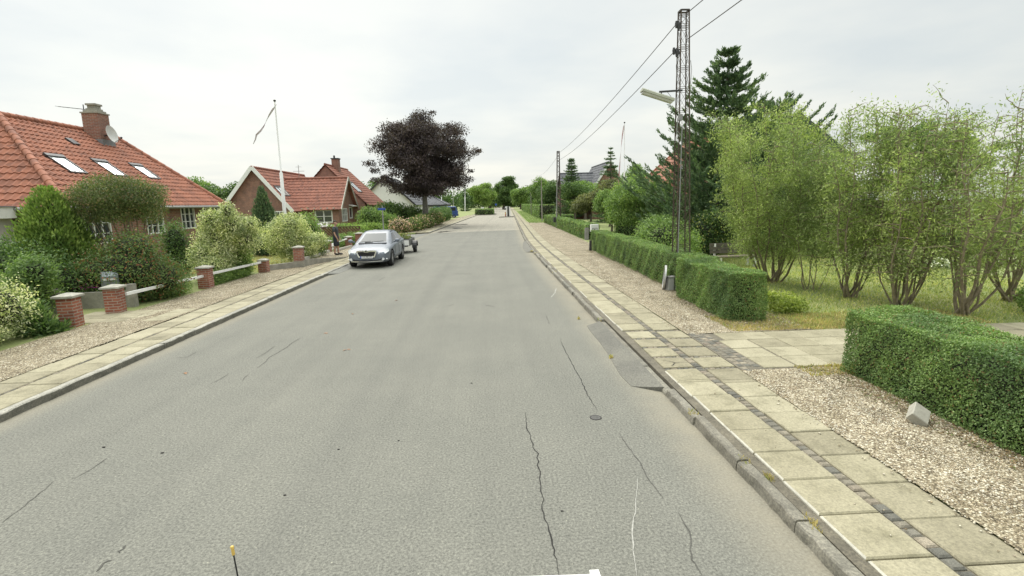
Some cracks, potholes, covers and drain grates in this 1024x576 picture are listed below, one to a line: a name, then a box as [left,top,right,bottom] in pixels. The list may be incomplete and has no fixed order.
crack [621,436,702,574]
crack [525,413,559,574]
